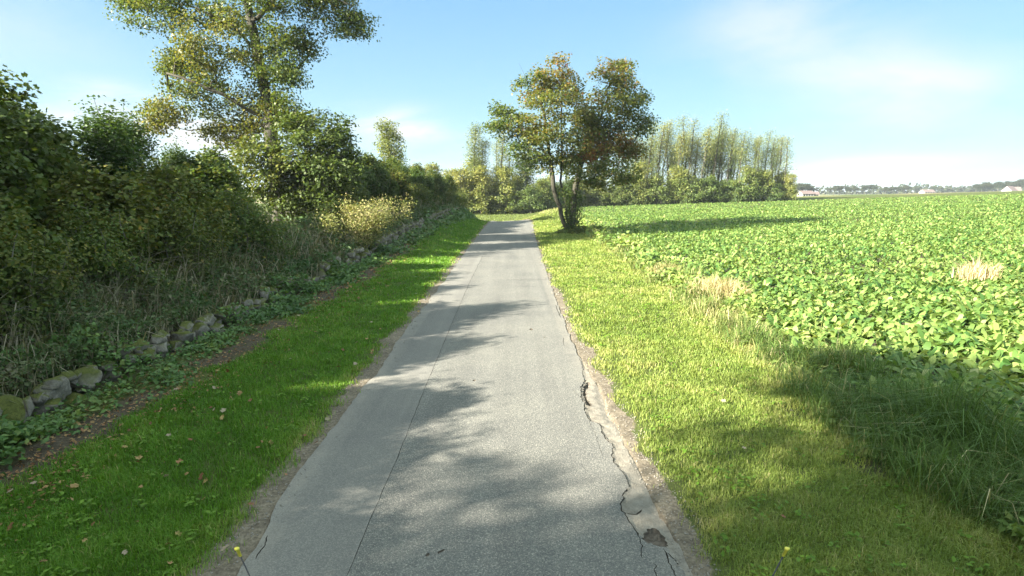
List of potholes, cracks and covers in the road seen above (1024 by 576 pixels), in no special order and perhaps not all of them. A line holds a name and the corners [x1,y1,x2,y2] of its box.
crack [563,339,678,576]
pothole [642,528,668,547]
